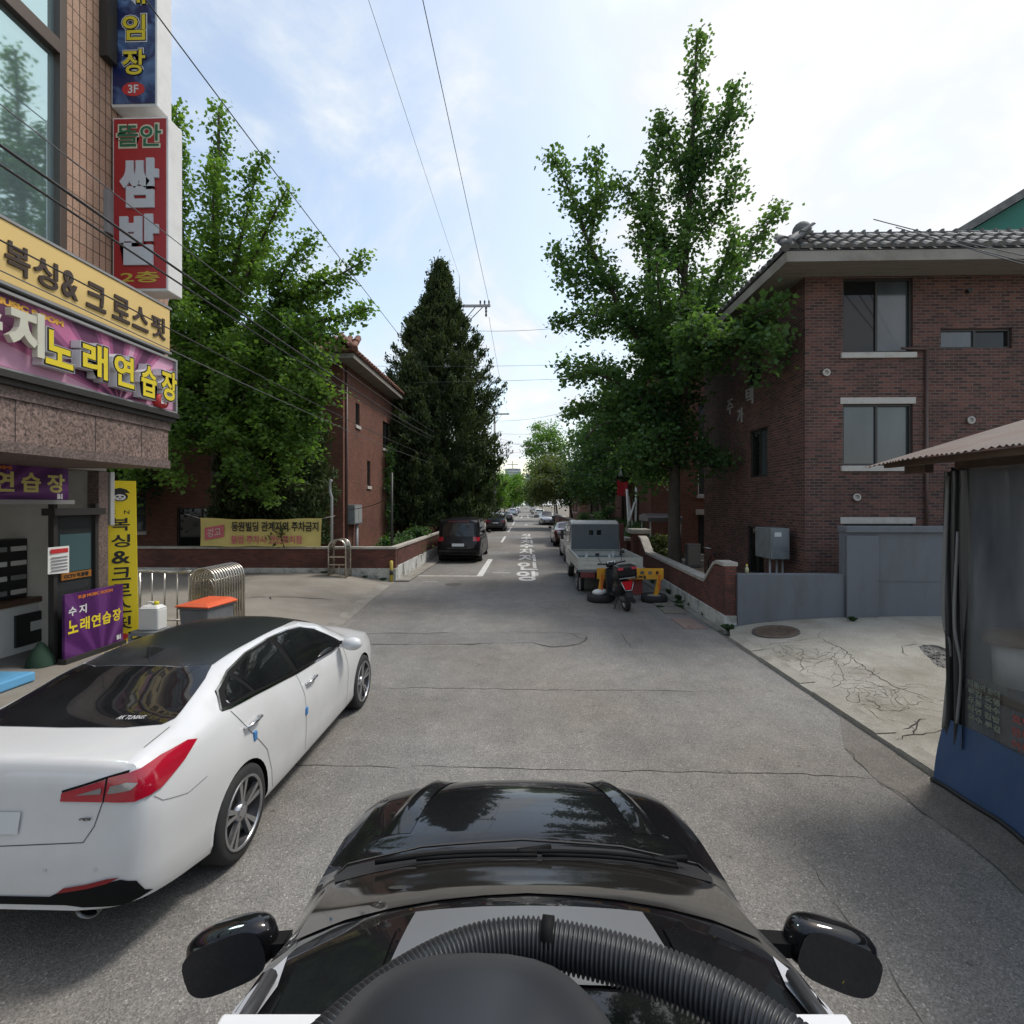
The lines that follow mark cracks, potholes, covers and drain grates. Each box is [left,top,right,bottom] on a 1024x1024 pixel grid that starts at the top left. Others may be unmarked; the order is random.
pothole [918,645,946,668]
crack [313,764,874,779]
crack [513,631,587,647]
crack [760,631,944,739]
manhole cover [752,625,800,639]
